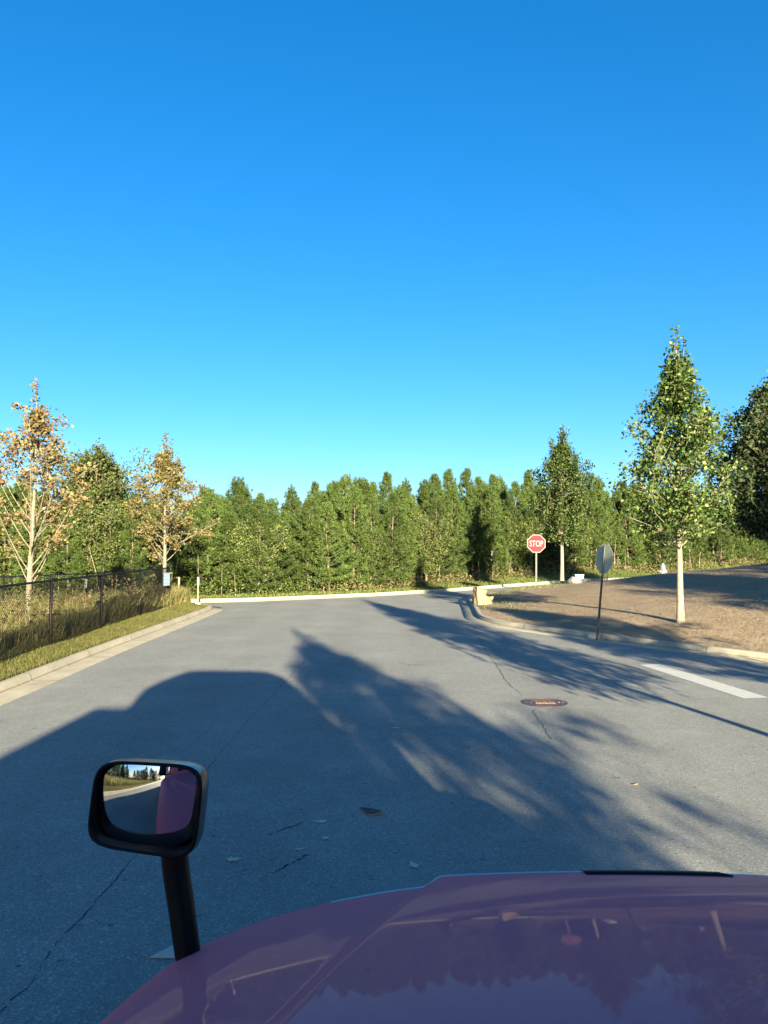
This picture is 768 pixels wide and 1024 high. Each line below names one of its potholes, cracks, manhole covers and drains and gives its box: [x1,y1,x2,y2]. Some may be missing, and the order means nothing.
manhole cover [522,698,568,707]
crack [0,685,282,1012]
